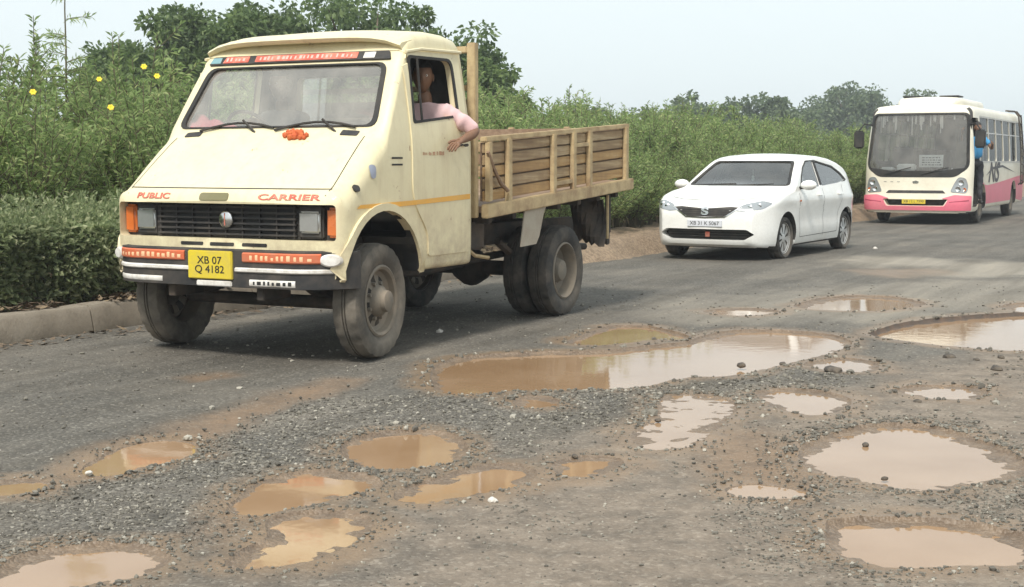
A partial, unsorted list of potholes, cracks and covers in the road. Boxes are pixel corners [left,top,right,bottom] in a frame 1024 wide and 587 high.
pothole [552,455,624,477]
pothole [869,312,1024,351]
pothole [824,516,1024,568]
pothole [340,429,469,469]
pothole [794,295,926,311]
pothole [224,509,375,569]
pothole [81,440,200,476]
pothole [630,394,738,450]
pothole [724,484,808,499]
pothole [430,329,852,394]
pothole [0,478,49,496]
pothole [804,357,880,373]
